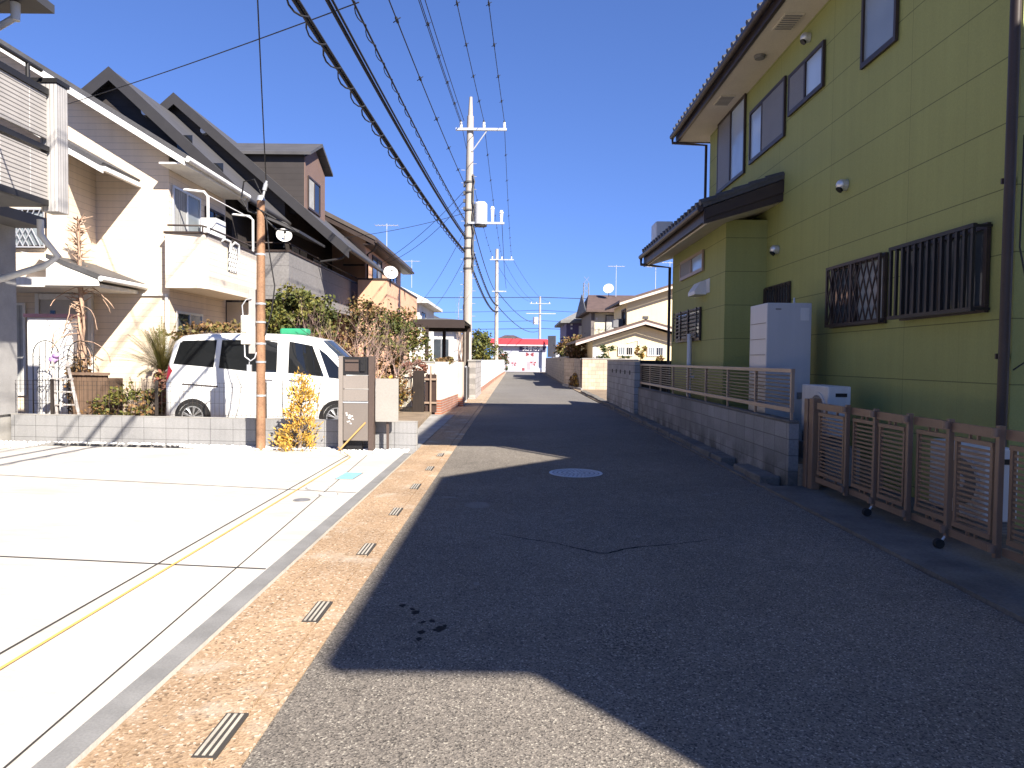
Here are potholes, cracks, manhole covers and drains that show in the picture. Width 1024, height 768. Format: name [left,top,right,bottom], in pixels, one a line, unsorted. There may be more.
manhole cover [549,469,603,478]
drain grate [356,543,377,556]
crack [480,530,732,554]
drain grate [191,713,249,761]
drain grate [302,601,333,624]
